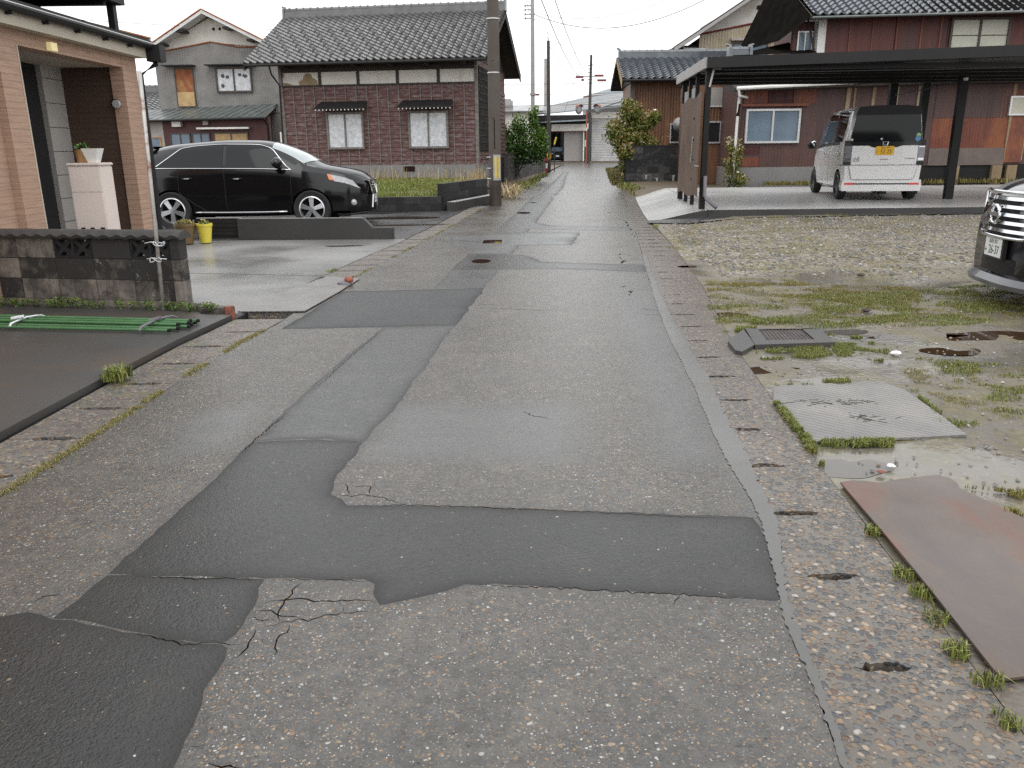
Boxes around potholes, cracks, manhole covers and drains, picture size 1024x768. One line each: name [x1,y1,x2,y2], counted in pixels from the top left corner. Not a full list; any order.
crack [217,583,374,659]
crack [336,485,401,504]
